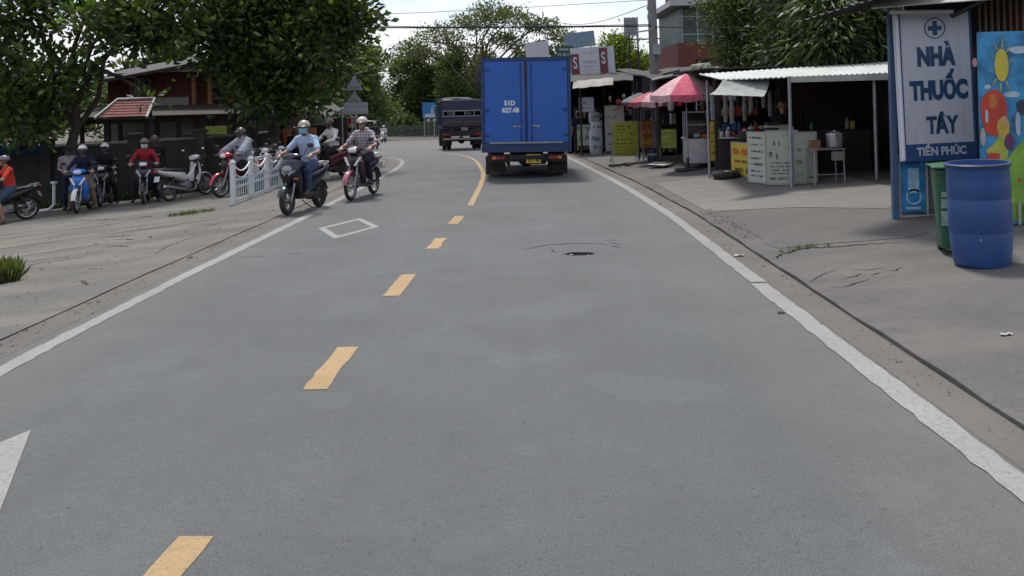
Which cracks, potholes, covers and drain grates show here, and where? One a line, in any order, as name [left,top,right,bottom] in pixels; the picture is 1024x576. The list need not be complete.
crack [528,240,618,253]
crack [810,267,902,287]
crack [776,242,901,258]
